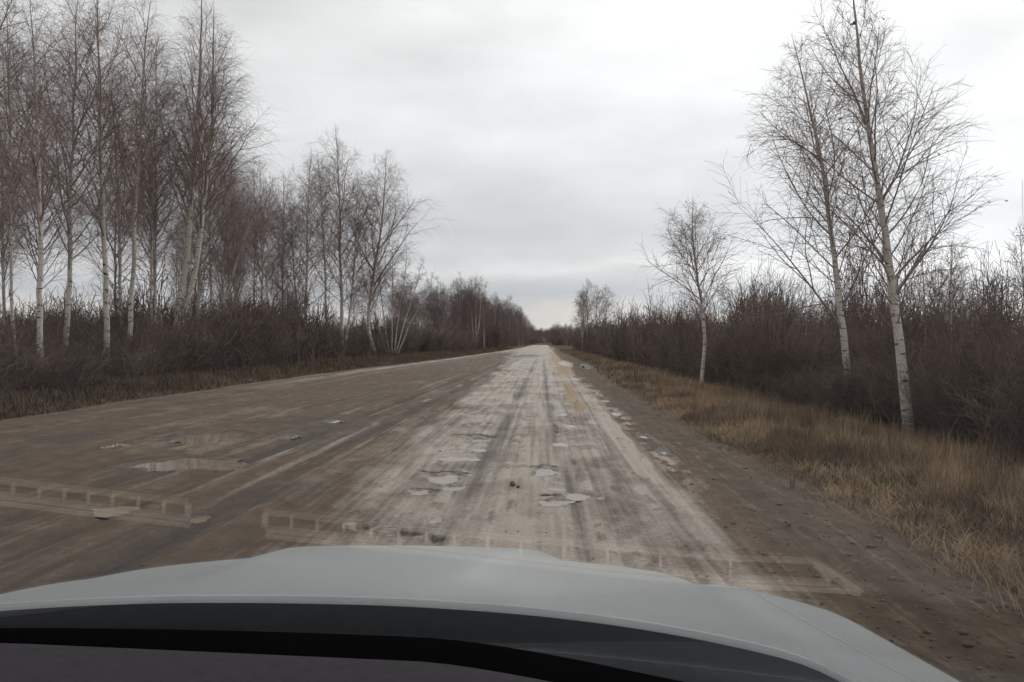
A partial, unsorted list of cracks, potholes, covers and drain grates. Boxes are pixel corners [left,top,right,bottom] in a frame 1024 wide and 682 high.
pothole [535,497,576,507]
pothole [77,503,141,521]
pothole [531,465,562,477]
pothole [554,491,605,502]
pothole [186,514,212,524]
pothole [110,456,250,472]
